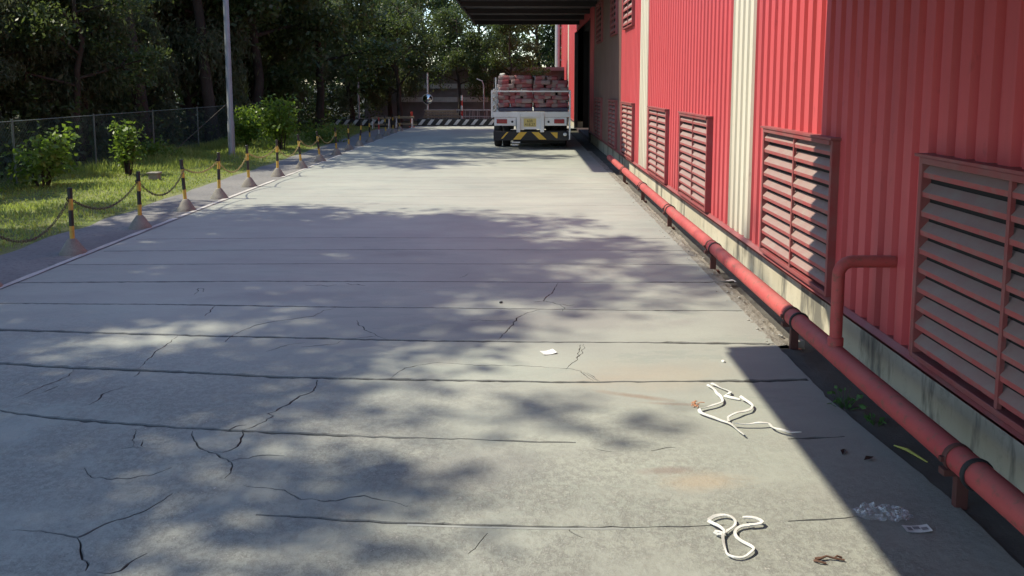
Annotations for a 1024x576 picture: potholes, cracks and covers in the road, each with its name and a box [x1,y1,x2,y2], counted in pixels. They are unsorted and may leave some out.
crack [85,467,172,480]
crack [473,285,571,340]
crack [191,381,407,507]
crack [89,339,173,405]
crack [23,494,171,574]
